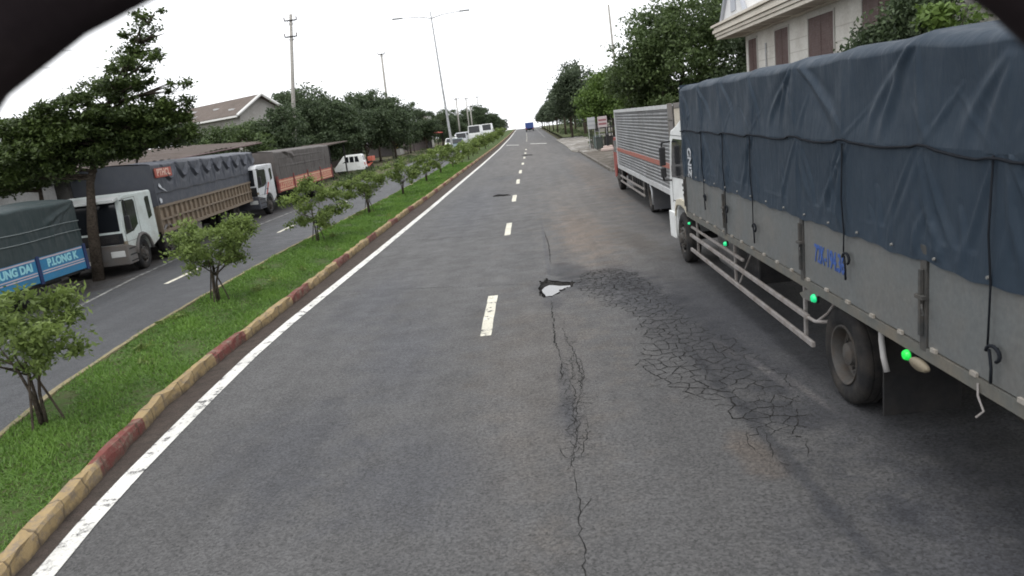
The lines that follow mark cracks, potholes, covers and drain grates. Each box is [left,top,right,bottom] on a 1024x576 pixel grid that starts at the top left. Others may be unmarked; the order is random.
crack [551,301,591,576]
pothole [538,278,575,298]
crack [575,268,809,458]
